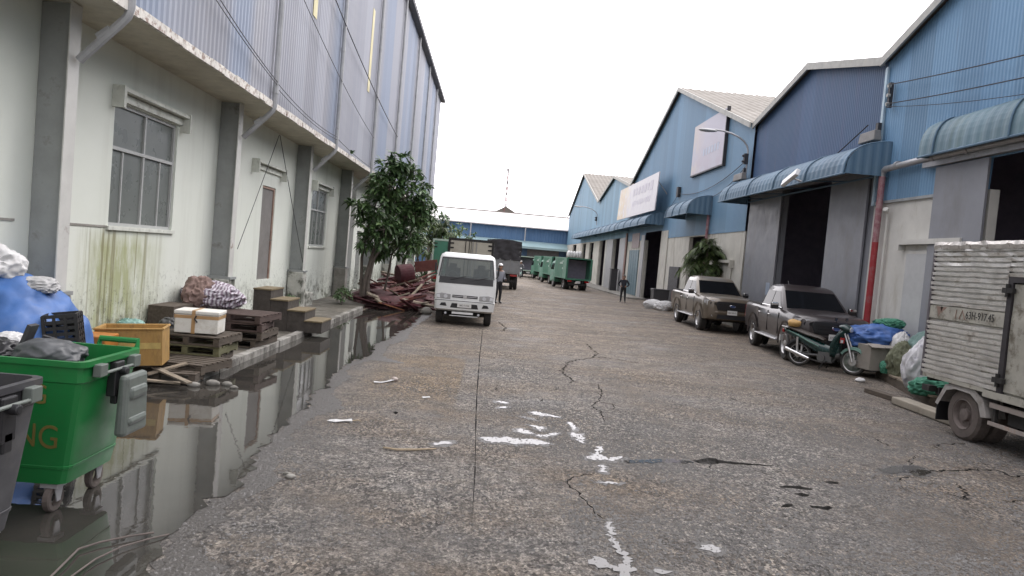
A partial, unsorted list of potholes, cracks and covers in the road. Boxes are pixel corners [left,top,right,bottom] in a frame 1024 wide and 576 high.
crack [566,474,612,521]
crack [898,443,1021,500]
crack [549,344,633,421]
